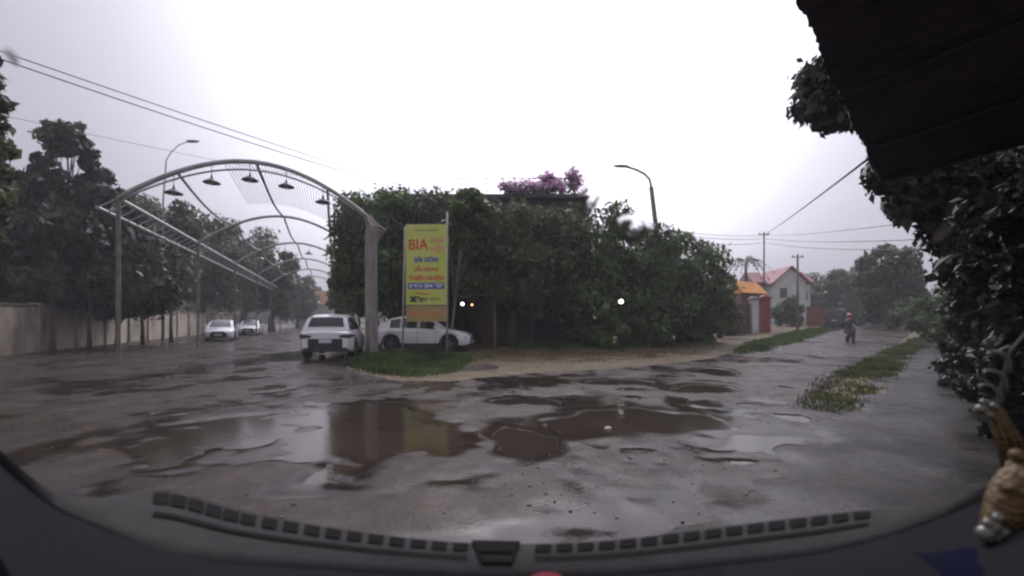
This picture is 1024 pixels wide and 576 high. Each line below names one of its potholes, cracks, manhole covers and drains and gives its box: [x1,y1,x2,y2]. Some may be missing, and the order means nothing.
pothole [772,413,812,422]
pothole [669,384,741,392]
pothole [491,425,559,454]
pothole [535,405,742,436]
